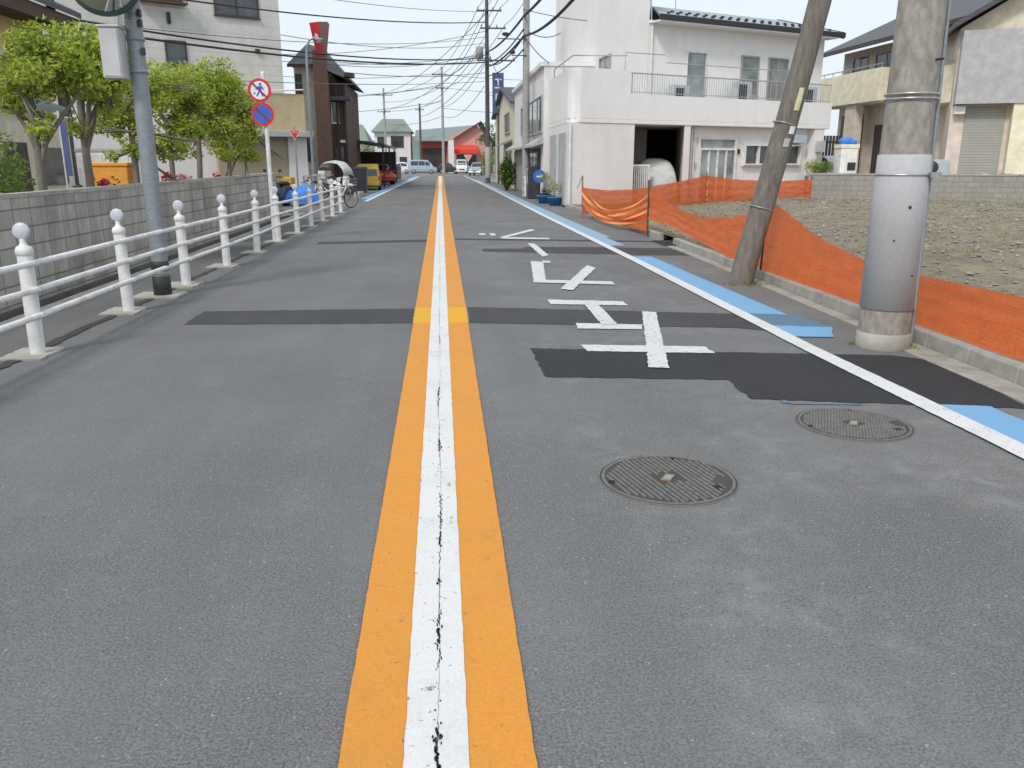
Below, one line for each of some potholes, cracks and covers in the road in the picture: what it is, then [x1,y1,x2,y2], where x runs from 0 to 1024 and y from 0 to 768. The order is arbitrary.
manhole cover [599,455,739,506]
manhole cover [795,408,915,442]
crack [432,229,443,768]
